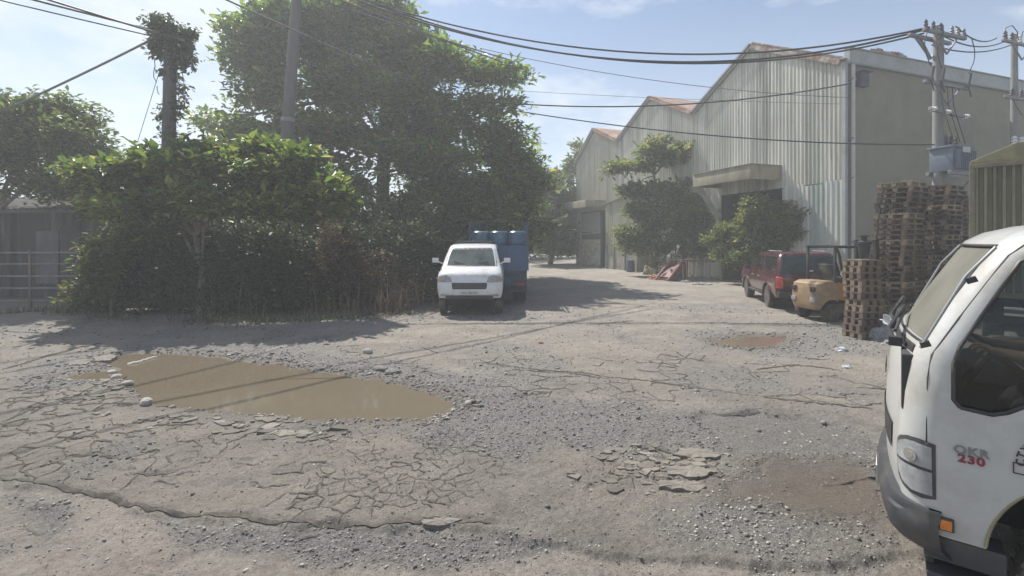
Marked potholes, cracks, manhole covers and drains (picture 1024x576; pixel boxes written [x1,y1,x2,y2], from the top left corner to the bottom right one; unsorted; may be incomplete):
crack [0,377,514,541]
crack [252,327,886,416]
pothole [108,353,453,421]
pothole [729,457,882,518]
pothole [711,334,790,348]
